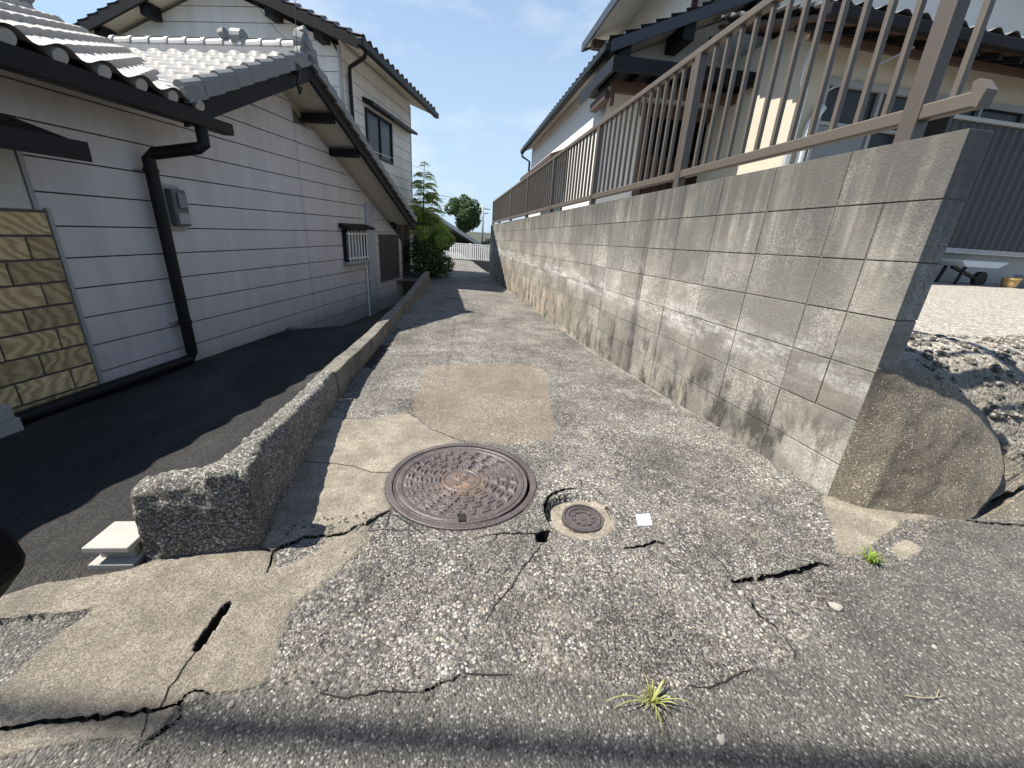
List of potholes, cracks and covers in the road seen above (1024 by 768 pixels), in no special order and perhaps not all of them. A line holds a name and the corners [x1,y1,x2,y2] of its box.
crack [688,669,753,689]
crack [263,510,422,573]
manhole cover [386,443,536,531]
crack [711,552,829,658]
crack [316,672,512,699]
crack [160,652,196,706]
utility cover [547,501,615,540]
crack [476,484,664,623]
